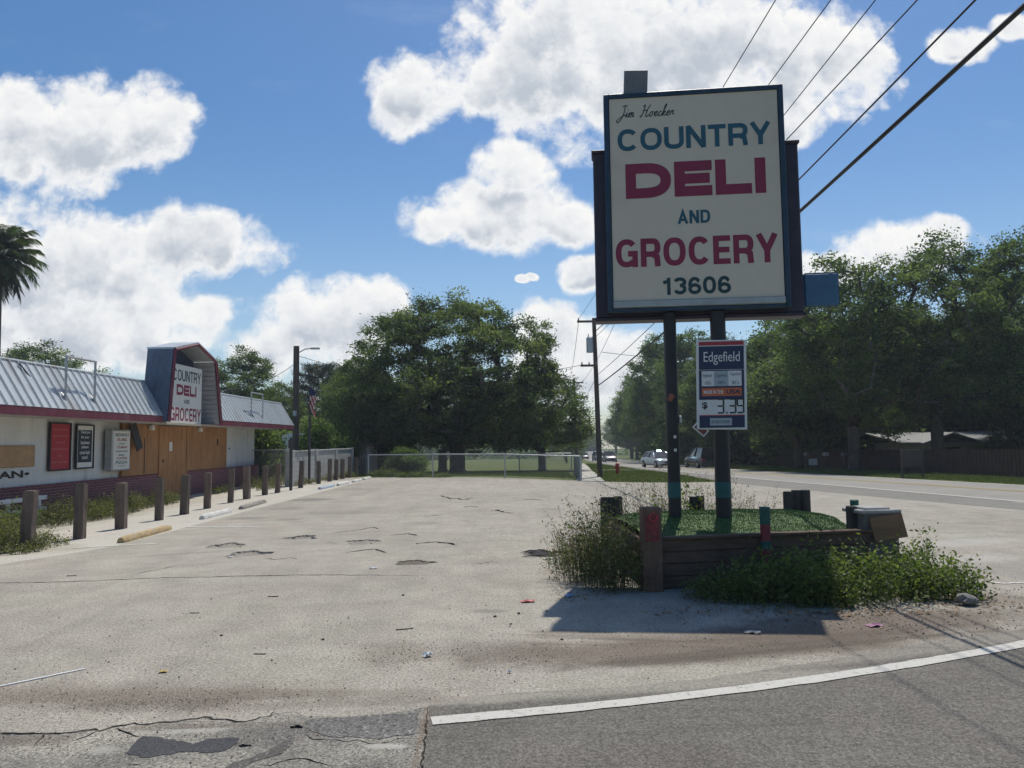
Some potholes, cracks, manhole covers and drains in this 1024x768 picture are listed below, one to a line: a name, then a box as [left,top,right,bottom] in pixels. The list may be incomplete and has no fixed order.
crack [0,712,302,745]
crack [265,734,411,767]
